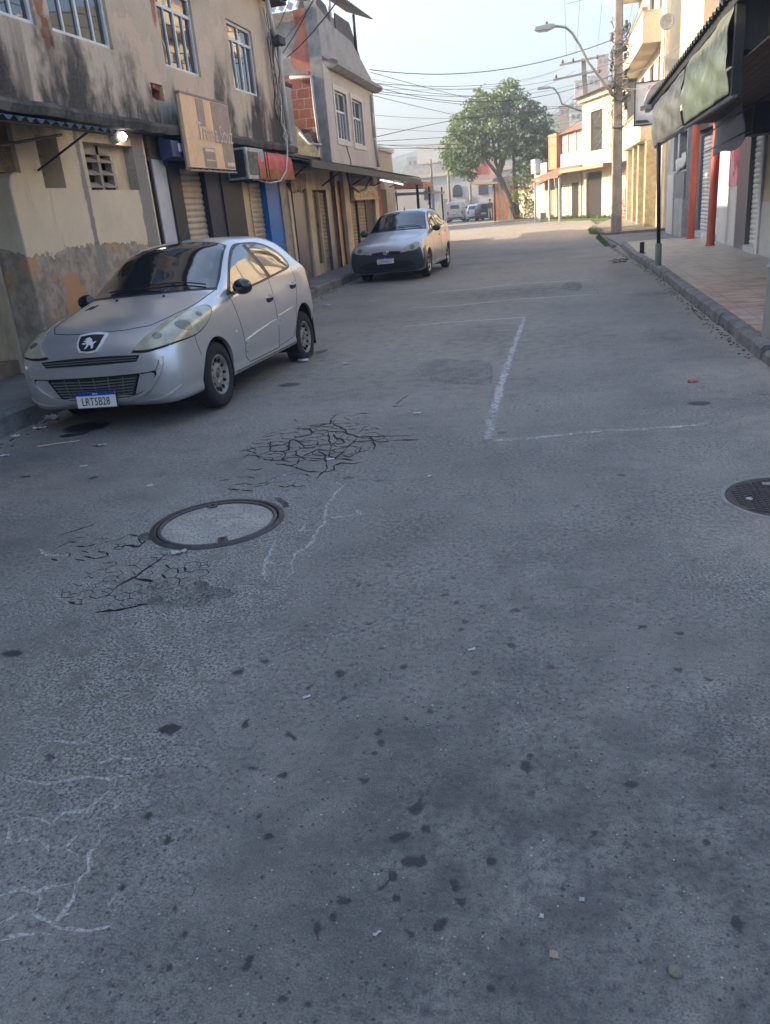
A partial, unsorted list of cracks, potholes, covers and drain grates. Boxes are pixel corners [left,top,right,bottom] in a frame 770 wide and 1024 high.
manhole cover [720,476,770,519]
crack [0,740,153,941]
manhole cover [149,499,285,550]
crack [38,413,419,613]
